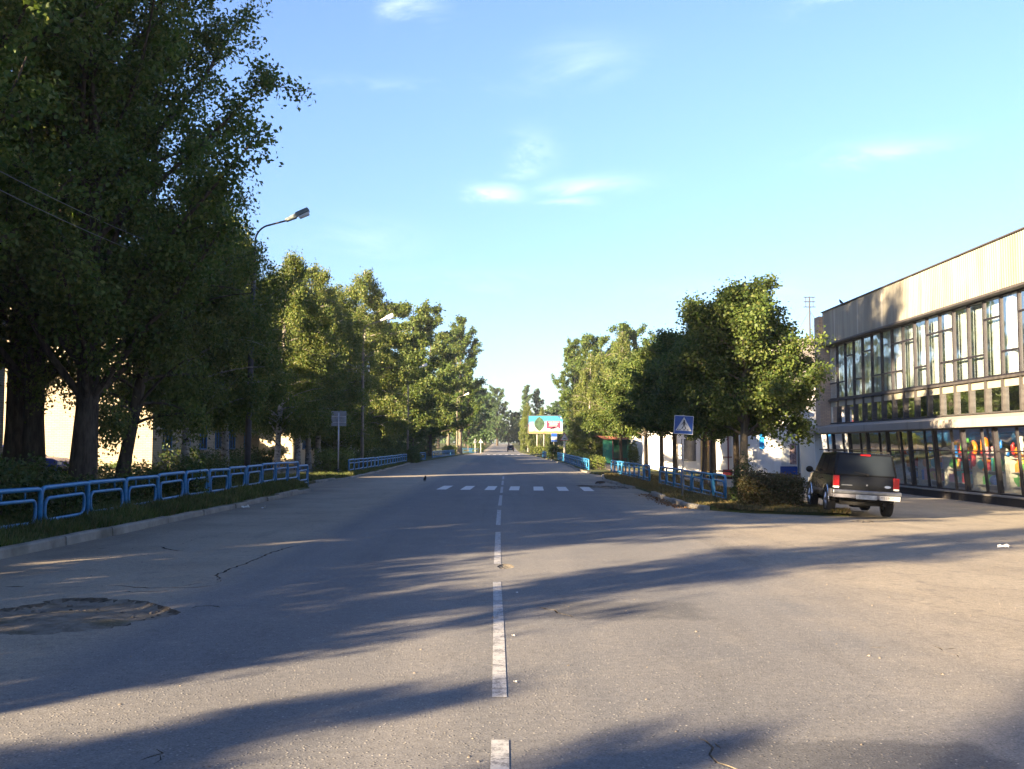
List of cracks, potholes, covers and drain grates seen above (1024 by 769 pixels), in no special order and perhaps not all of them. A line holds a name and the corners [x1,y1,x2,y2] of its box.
crack [107,545,298,592]
pothole [0,597,181,635]
crack [698,737,736,769]
